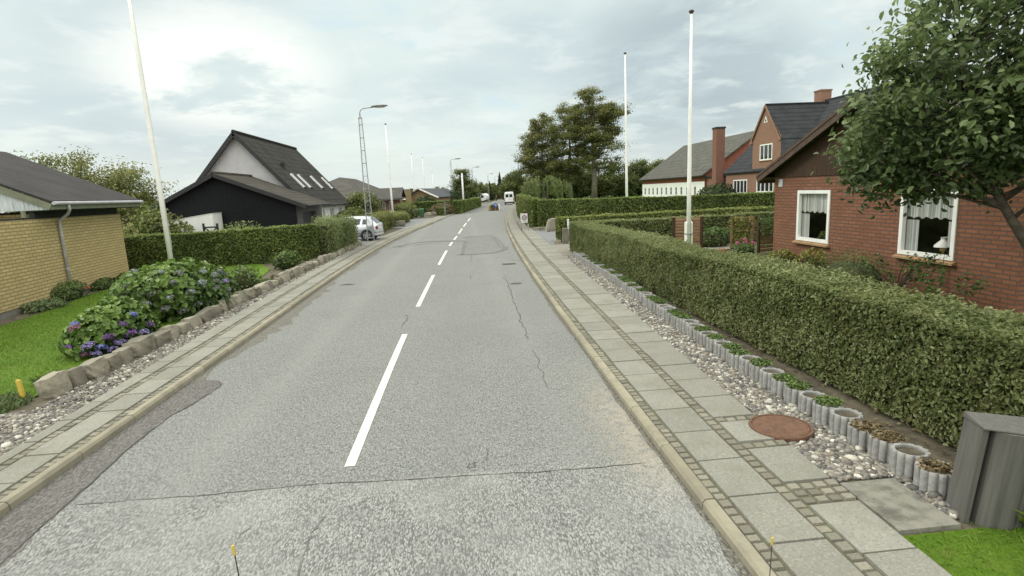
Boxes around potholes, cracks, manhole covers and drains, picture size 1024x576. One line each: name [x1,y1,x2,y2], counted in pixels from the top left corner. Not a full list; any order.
manhole cover [748,414,814,443]
crack [504,276,567,389]
crack [297,515,326,576]
